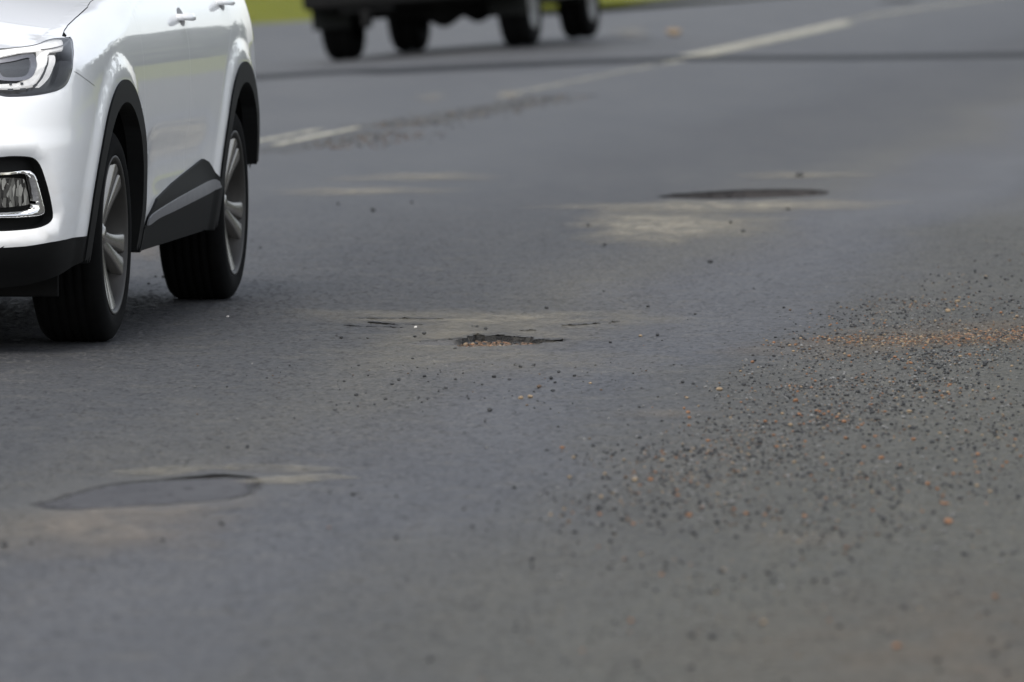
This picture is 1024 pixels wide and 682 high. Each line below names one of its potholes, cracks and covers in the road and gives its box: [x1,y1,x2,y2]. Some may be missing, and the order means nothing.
crack [344,319,429,328]
pothole [656,189,829,199]
pothole [29,475,264,511]
pothole [407,335,571,348]
